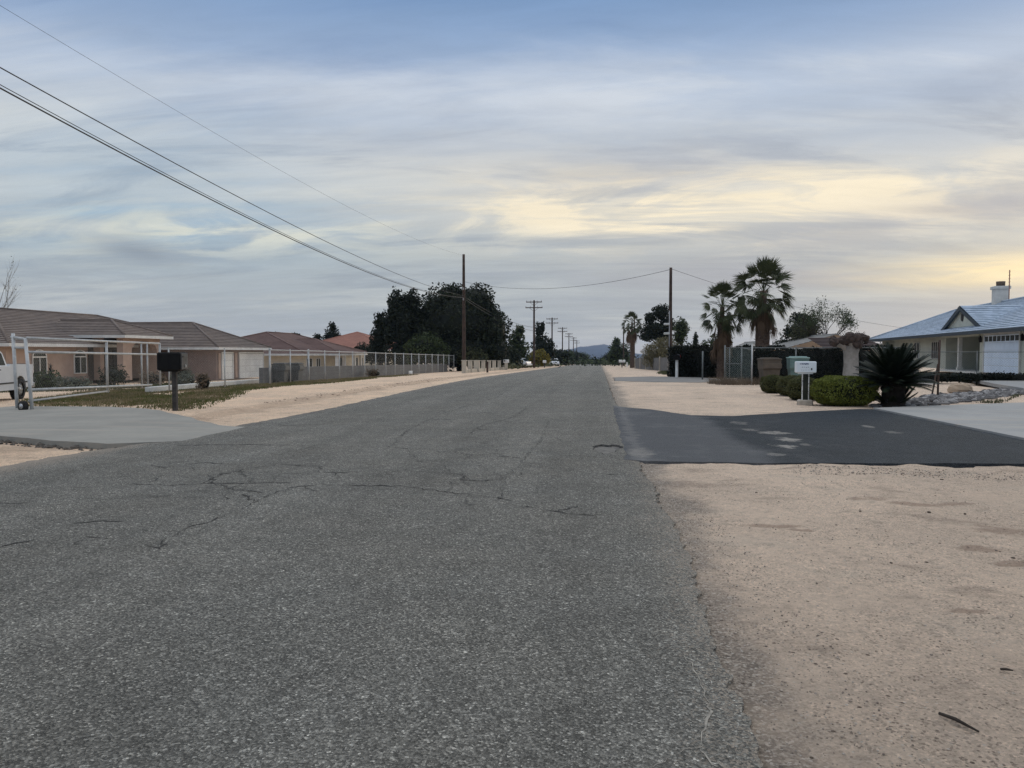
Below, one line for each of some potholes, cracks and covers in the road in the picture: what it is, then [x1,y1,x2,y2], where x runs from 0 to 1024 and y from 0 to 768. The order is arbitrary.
crack [142,397,562,549]
